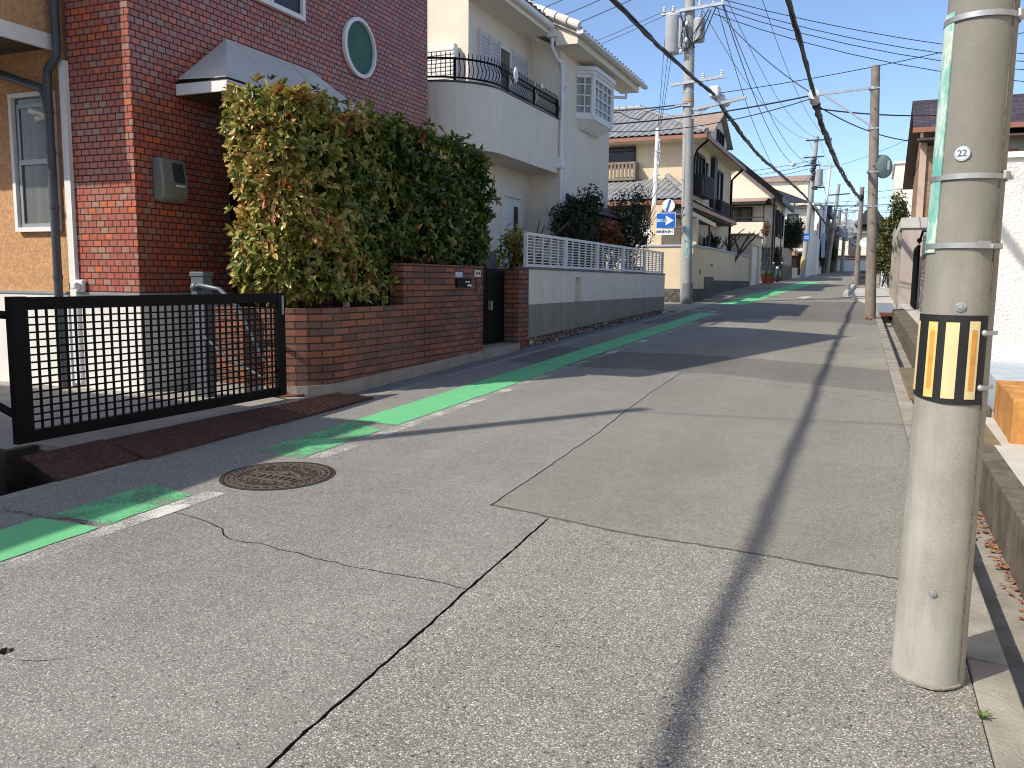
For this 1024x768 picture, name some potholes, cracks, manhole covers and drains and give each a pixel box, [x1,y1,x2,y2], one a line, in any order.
manhole cover [219,462,336,491]
crack [173,512,468,589]
